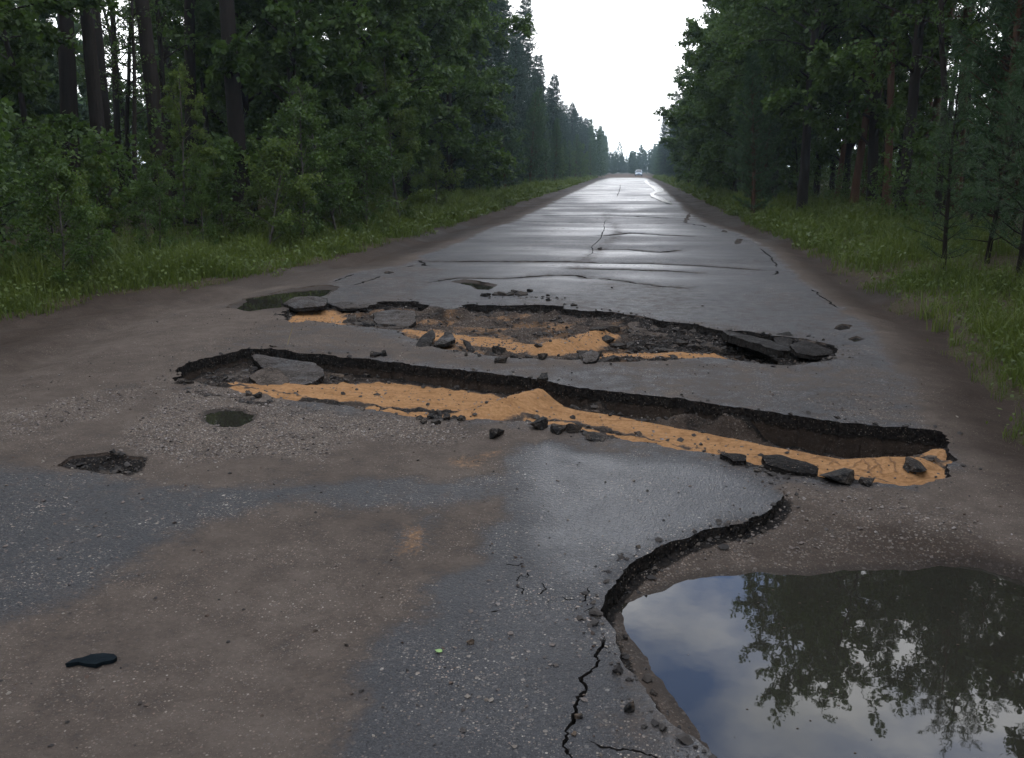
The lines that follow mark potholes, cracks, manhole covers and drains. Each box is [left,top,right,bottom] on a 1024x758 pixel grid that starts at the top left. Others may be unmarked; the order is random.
pothole [600,478,1024,754]
pothole [172,348,958,486]
pothole [226,285,339,312]
pothole [58,452,145,474]
crack [562,633,658,758]
pothole [451,279,497,289]
crack [491,563,592,613]
pothole [277,301,838,365]
crack [407,216,779,288]
